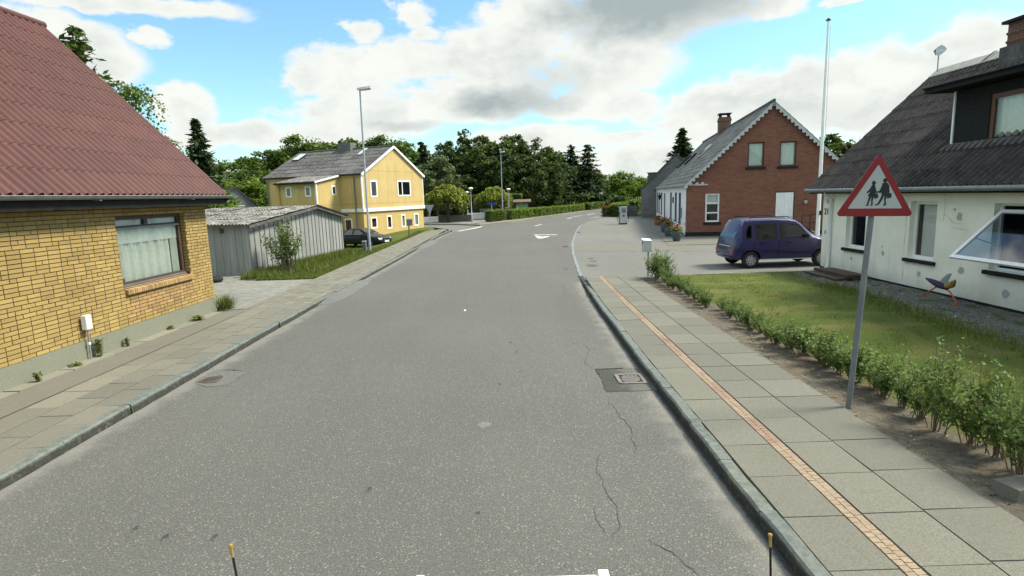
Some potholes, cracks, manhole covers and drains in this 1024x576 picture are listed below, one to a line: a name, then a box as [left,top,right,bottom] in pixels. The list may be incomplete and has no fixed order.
drain grate [614,373,648,384]
crack [594,455,621,539]
